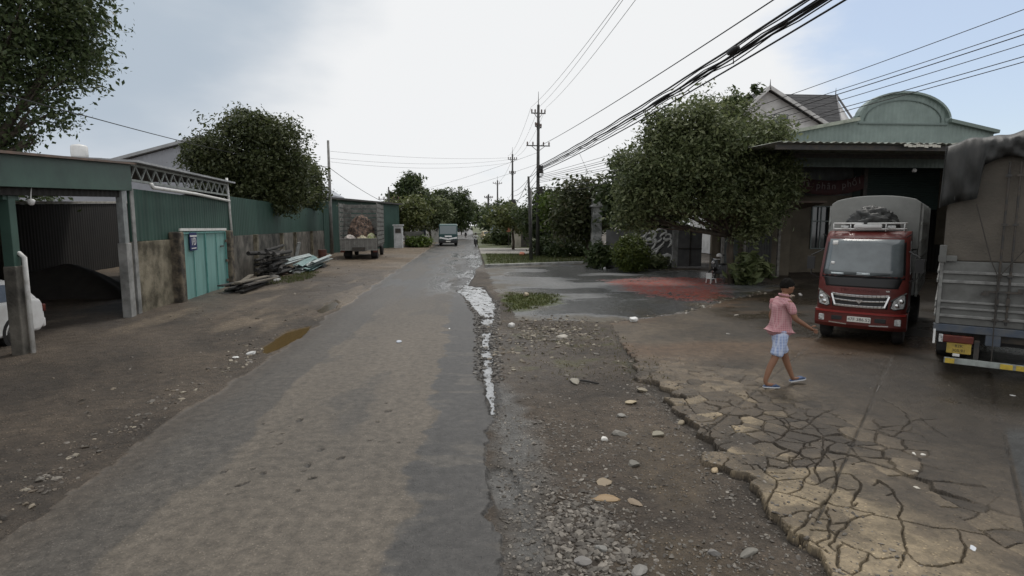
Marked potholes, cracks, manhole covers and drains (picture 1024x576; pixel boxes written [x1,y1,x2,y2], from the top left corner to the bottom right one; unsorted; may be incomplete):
pothole [260,326,313,354]
crack [644,368,1024,576]
